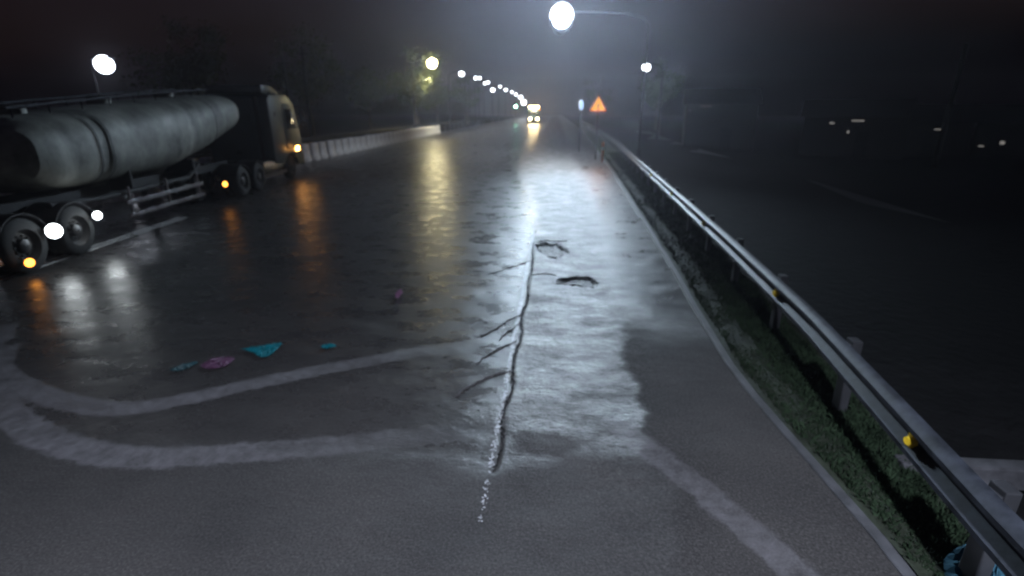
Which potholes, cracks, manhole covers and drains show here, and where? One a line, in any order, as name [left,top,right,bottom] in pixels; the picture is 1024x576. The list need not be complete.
pothole [531,242,571,259]
pothole [552,276,600,288]
crack [455,231,567,471]
